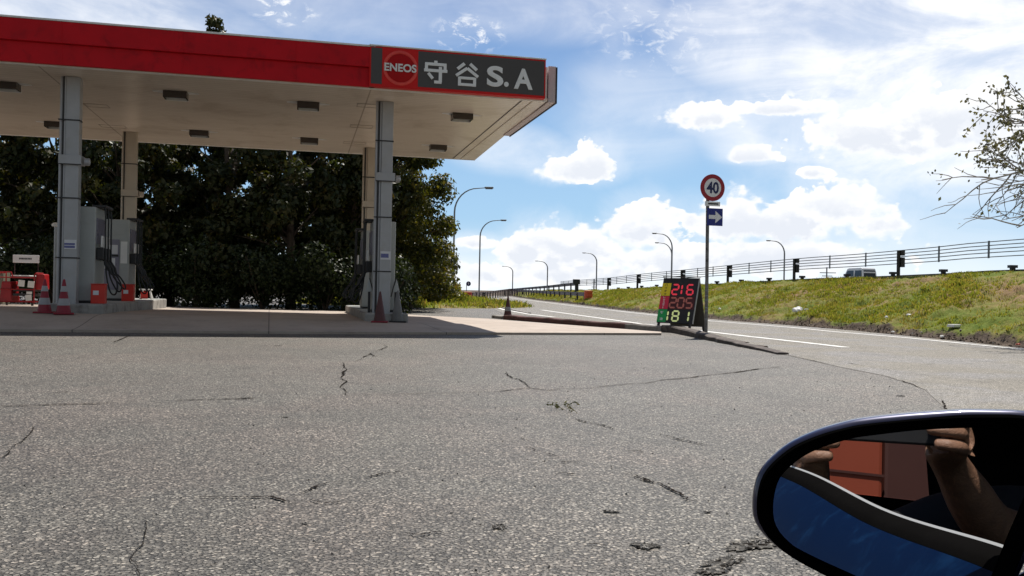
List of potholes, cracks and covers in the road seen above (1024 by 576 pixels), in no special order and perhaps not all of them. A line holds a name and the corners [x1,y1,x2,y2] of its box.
pothole [699,555,746,567]
crack [130,518,147,576]
crack [203,470,411,503]
pothole [693,565,732,574]
pothole [629,542,662,550]
crack [628,472,693,501]
crack [340,345,387,393]
pothole [723,539,775,551]
